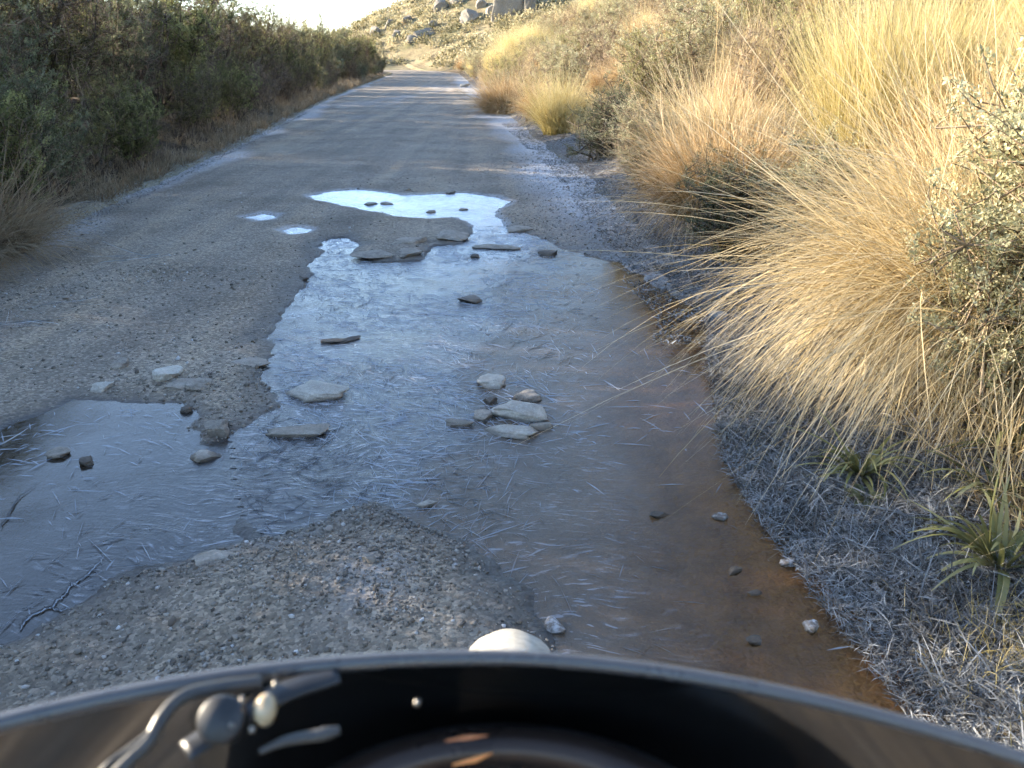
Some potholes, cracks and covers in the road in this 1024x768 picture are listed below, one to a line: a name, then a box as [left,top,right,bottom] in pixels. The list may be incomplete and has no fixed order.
pothole [221,225,963,730]
pothole [0,397,262,645]
pothole [307,188,514,227]
